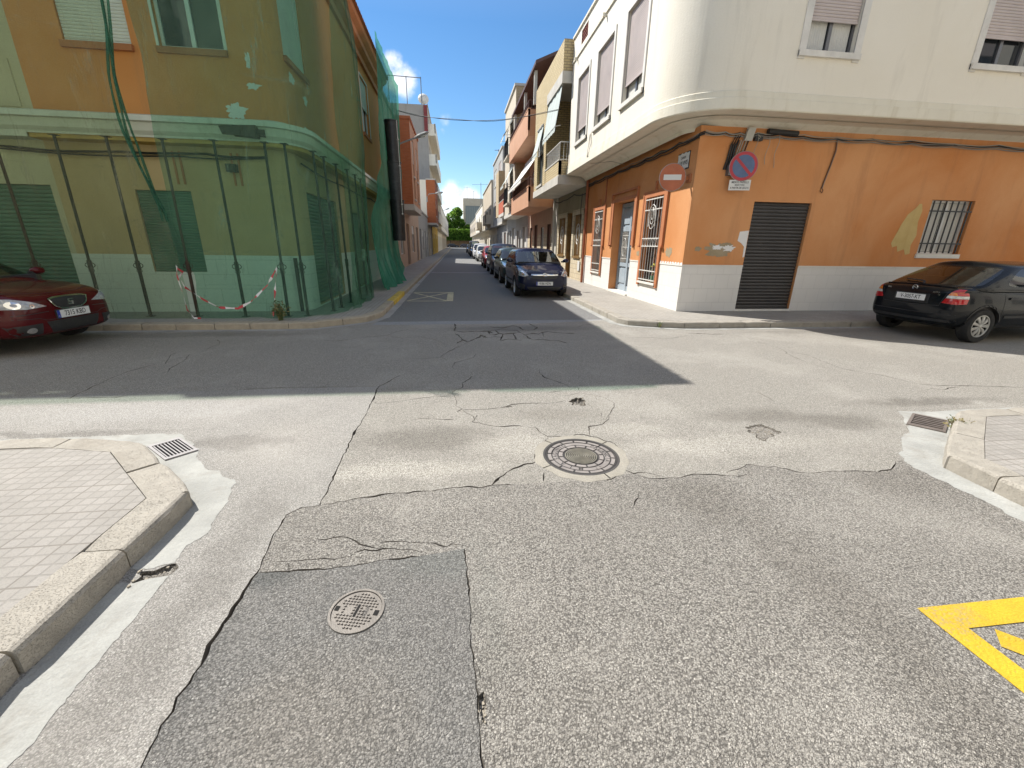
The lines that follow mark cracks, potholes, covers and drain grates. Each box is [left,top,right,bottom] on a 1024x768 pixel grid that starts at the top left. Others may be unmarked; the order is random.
manhole cover [327,589,385,635]
pothole [127,563,178,588]
crack [326,324,896,506]
drain grate [147,437,199,461]
drain grate [906,413,949,433]
manhole cover [534,435,630,482]
pothole [745,424,781,441]
